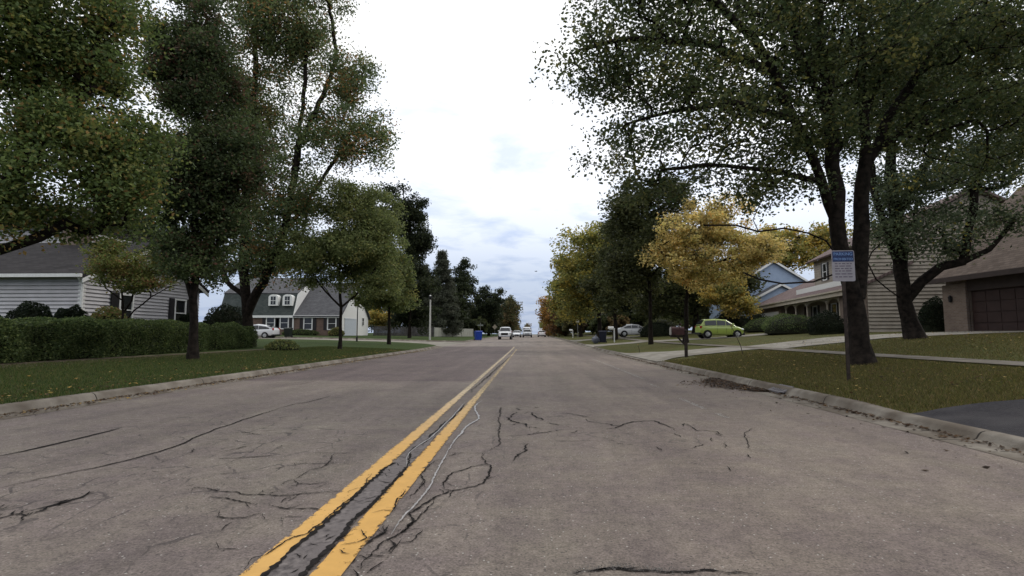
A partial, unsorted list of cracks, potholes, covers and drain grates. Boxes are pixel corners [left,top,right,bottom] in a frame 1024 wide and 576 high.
crack [0,397,757,576]
